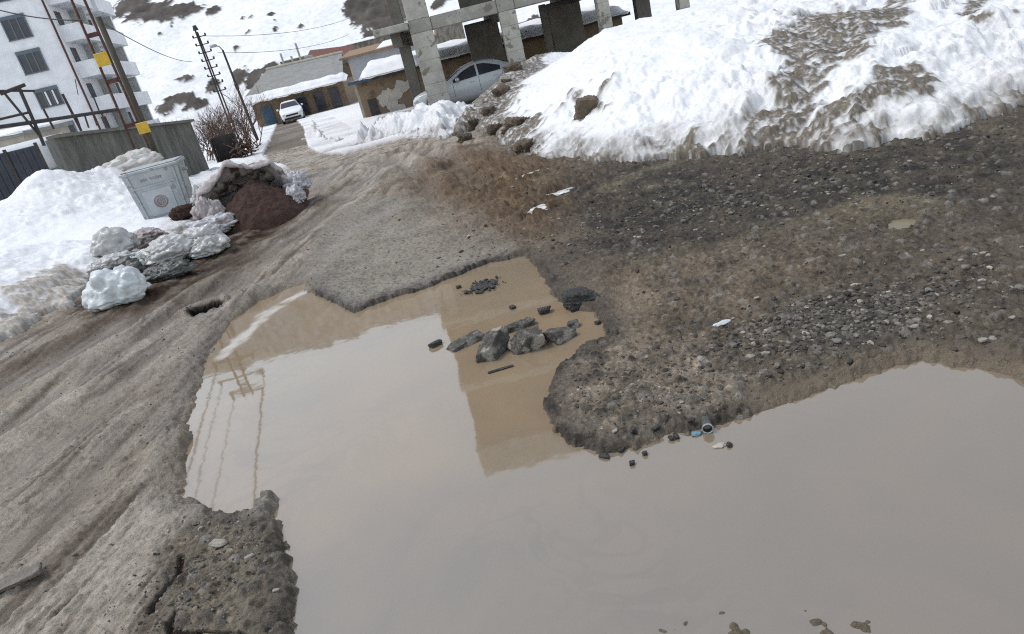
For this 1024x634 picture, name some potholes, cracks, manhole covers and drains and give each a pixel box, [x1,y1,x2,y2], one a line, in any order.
pothole [874,209,925,230]
pothole [163,247,1024,634]
crack [153,560,184,634]
